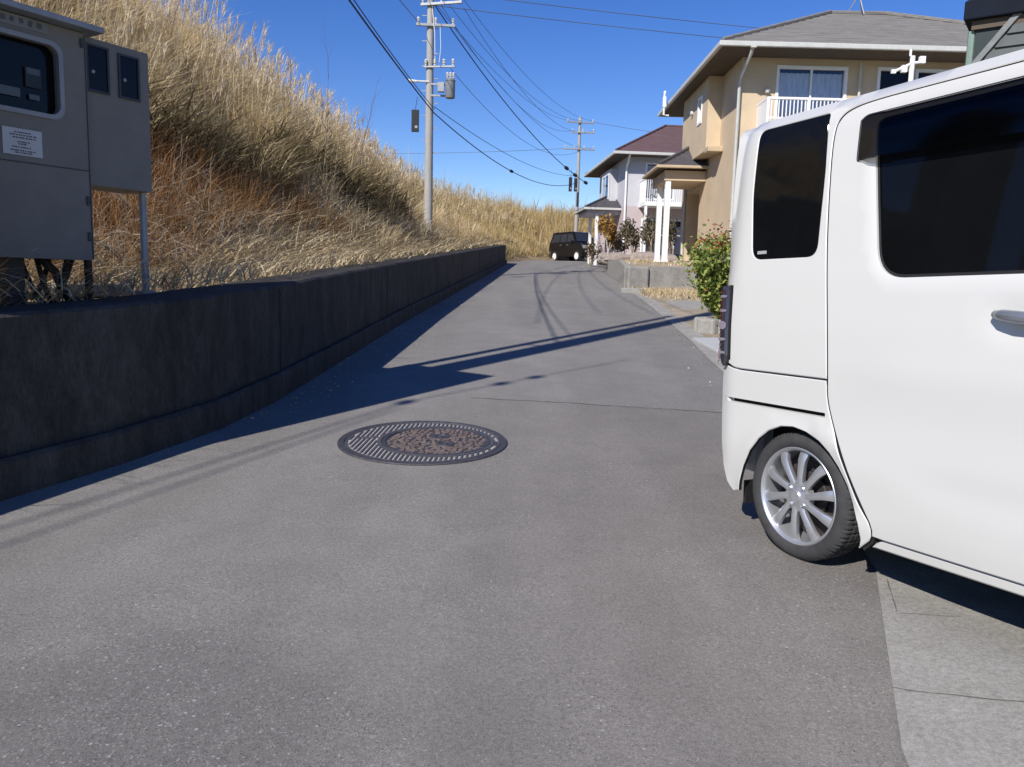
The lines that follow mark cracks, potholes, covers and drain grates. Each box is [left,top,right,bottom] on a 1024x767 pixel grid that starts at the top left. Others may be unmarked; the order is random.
manhole cover [337,421,507,466]
